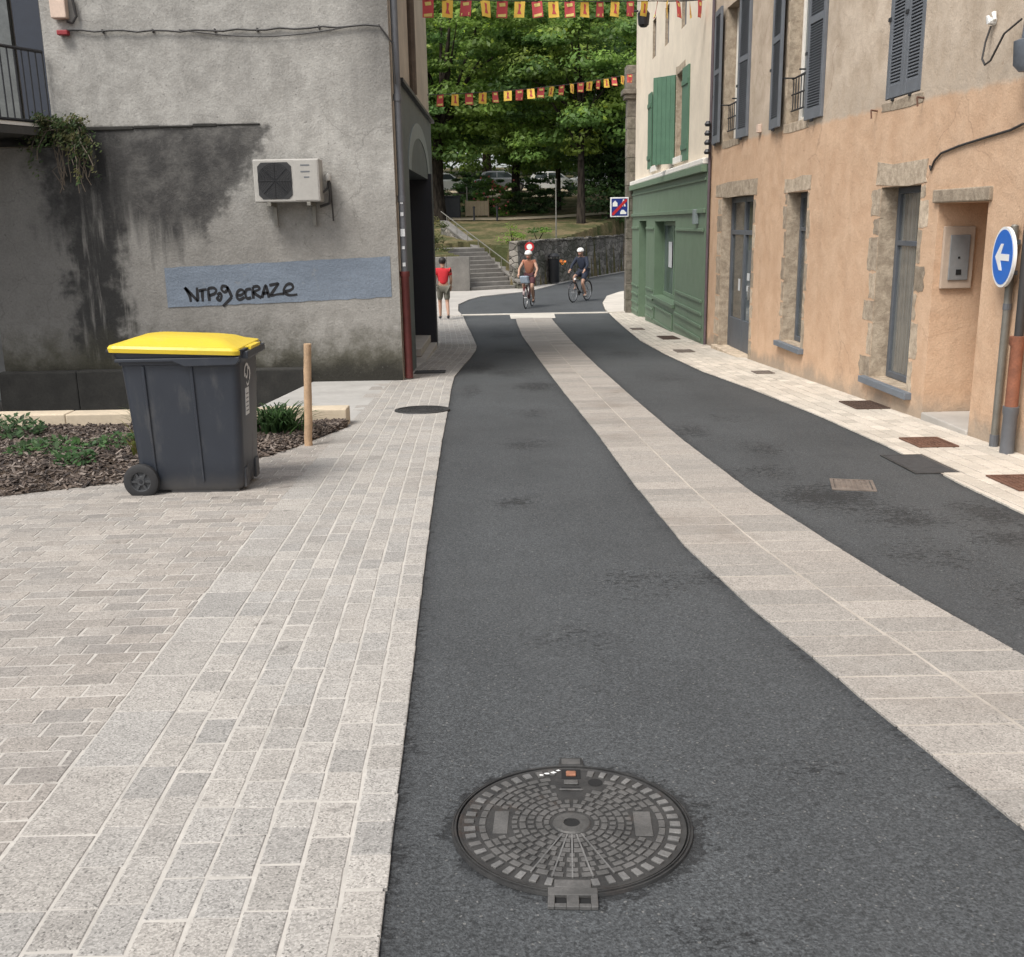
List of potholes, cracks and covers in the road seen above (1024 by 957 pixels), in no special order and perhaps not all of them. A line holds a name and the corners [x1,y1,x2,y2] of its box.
manhole cover [395,405,450,414]
drain grate [829,478,877,492]
manhole cover [452,758,694,910]
manhole cover [880,454,959,474]
